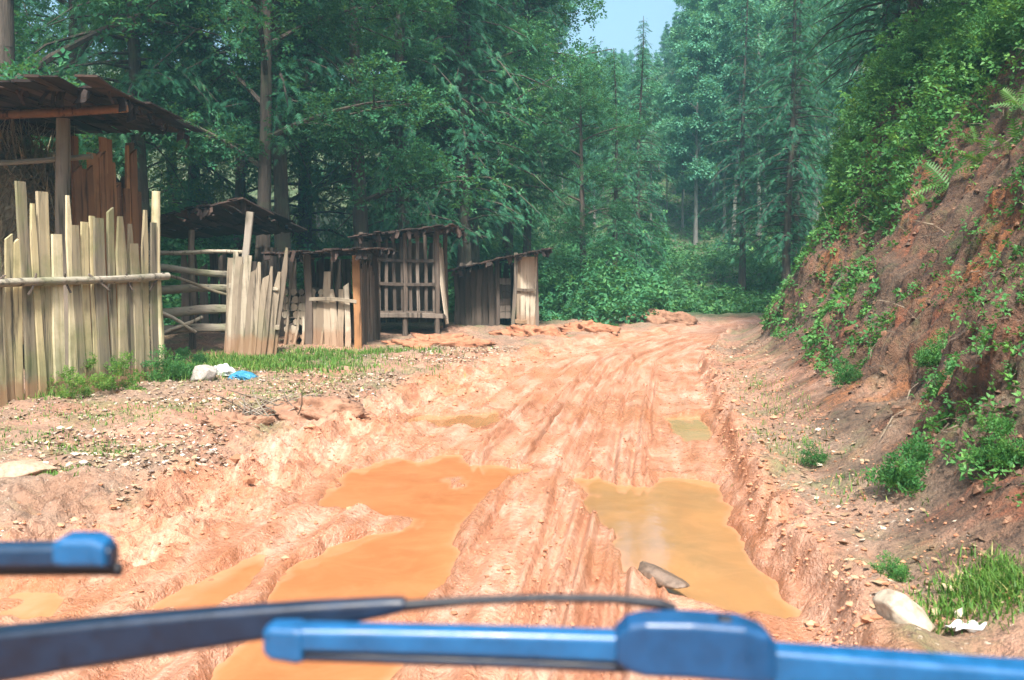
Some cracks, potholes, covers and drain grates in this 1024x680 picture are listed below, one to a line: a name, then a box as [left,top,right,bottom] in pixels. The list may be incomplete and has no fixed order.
pothole [400,404,506,429]
pothole [559,464,832,626]
pothole [659,408,721,443]
pothole [175,445,539,680]
